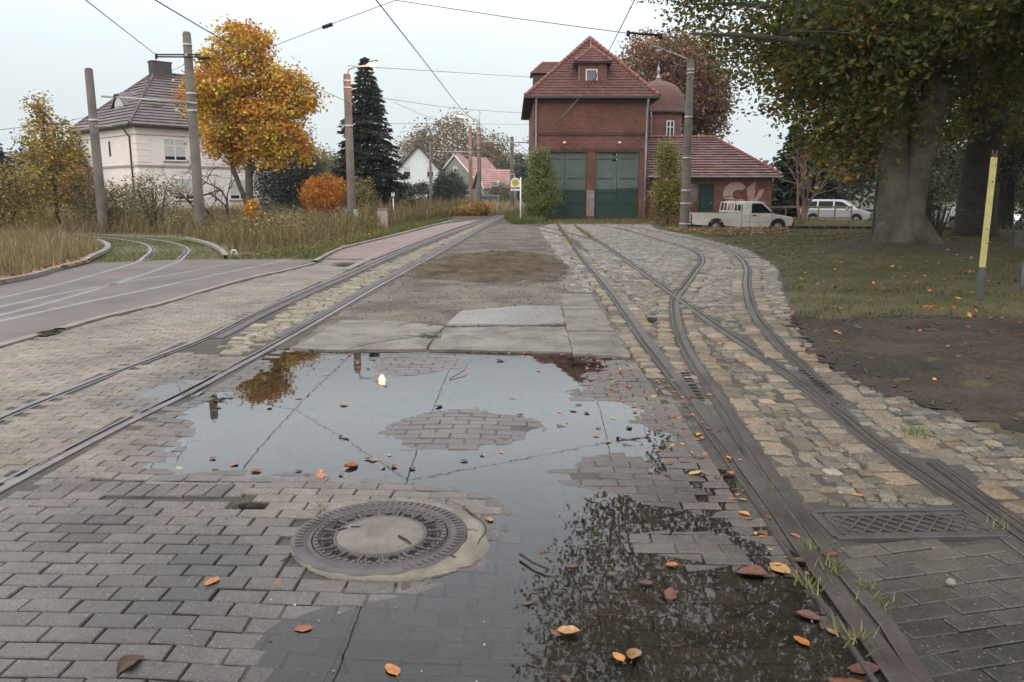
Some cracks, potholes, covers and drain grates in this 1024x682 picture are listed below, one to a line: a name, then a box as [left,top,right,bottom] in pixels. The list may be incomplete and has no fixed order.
drain grate [810,507,1007,542]
crack [292,605,539,682]
crack [587,402,632,449]
manhole cover [290,498,489,583]
pothole [236,502,269,511]
